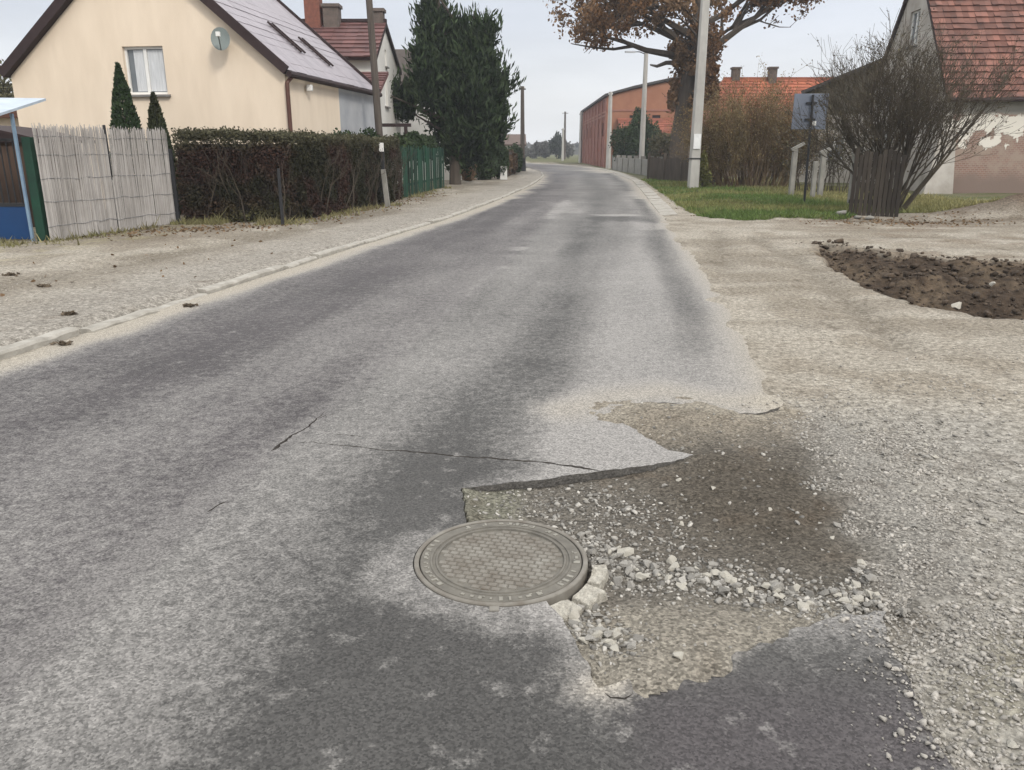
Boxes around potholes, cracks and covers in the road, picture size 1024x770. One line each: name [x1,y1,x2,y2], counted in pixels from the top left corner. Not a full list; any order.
crack [271,410,600,471]
pothole [462,396,976,698]
manhole cover [414,519,588,612]
